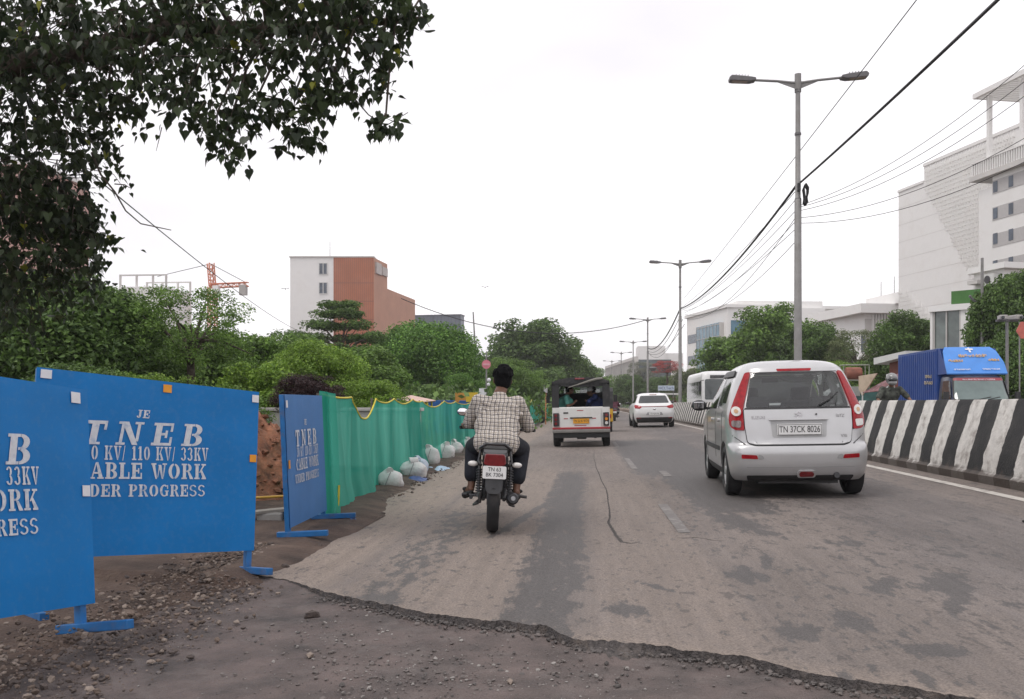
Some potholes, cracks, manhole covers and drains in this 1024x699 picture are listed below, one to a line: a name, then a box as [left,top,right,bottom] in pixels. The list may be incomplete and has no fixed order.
crack [594,460,637,544]
